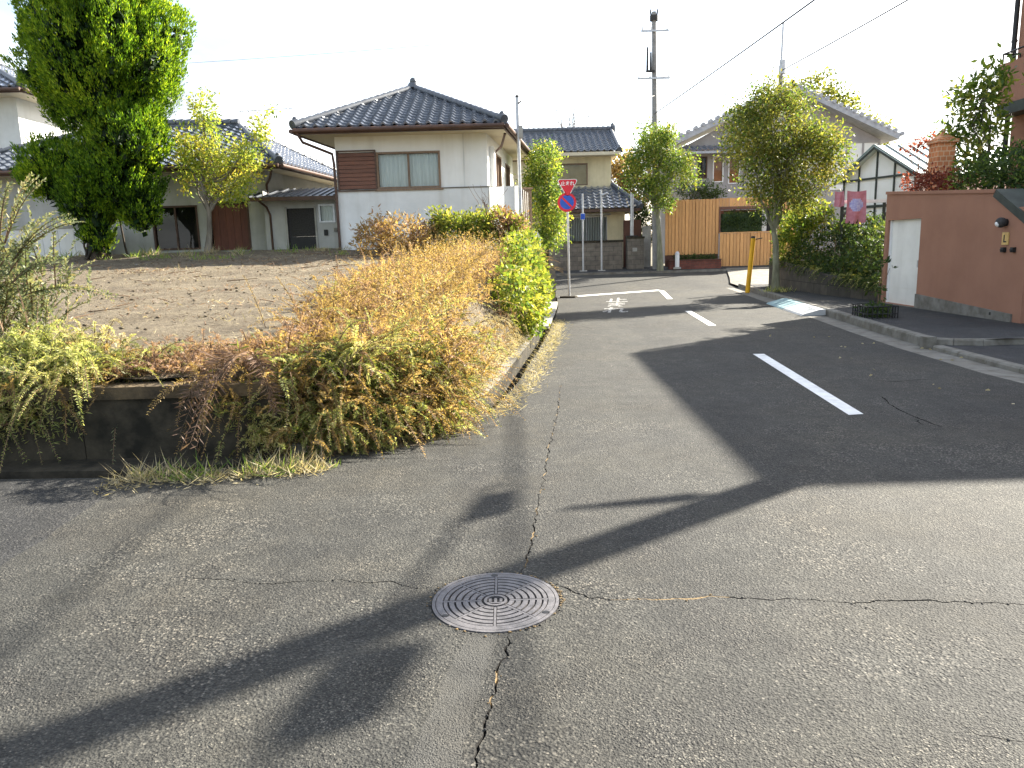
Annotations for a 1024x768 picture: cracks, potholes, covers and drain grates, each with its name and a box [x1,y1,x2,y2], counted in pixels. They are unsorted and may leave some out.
crack [186,576,428,589]
crack [554,583,1024,615]
crack [474,633,512,768]
crack [521,386,562,575]
manhole cover [432,573,559,633]
crack [878,379,939,427]
